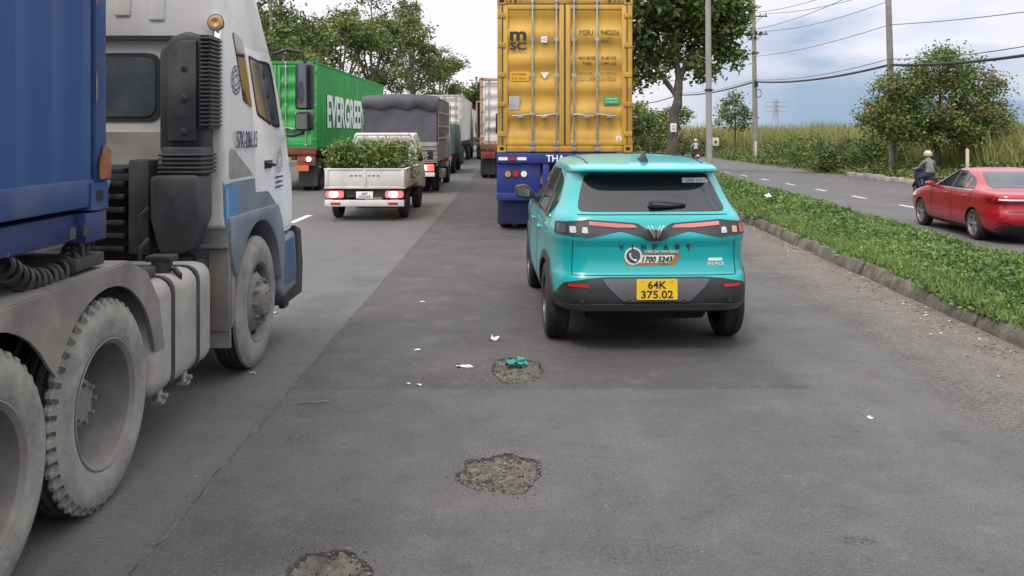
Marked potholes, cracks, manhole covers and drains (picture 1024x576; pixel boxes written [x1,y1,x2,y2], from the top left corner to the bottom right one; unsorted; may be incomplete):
pothole [446,450,550,499]
pothole [272,543,388,576]
pothole [485,356,549,385]
